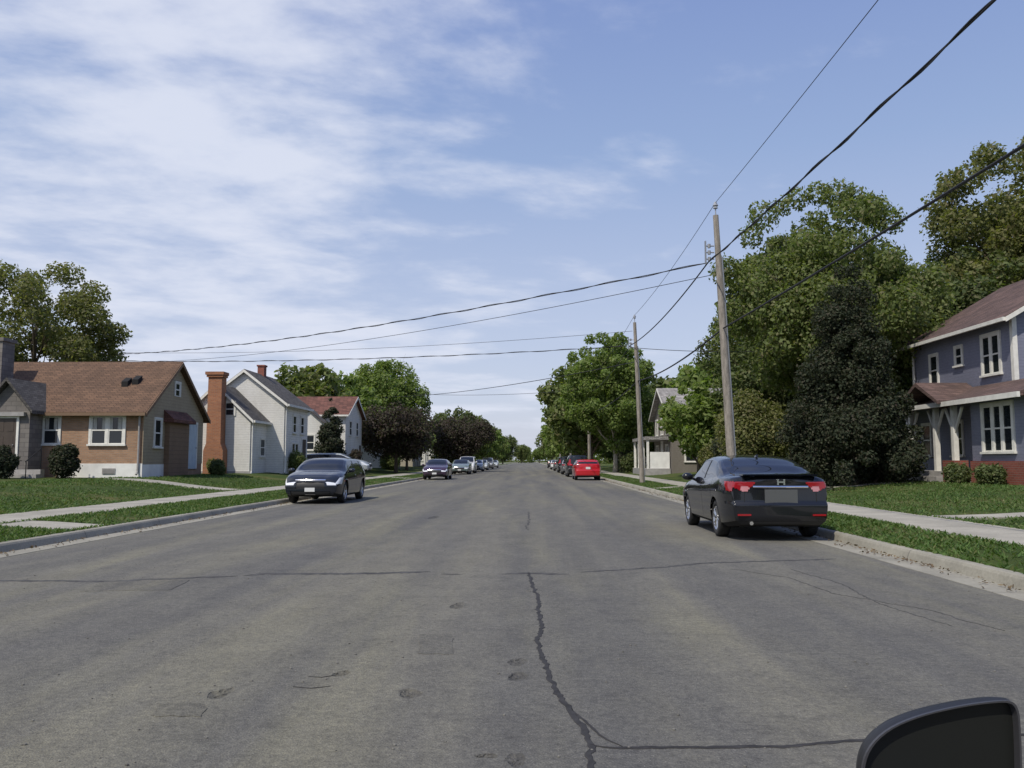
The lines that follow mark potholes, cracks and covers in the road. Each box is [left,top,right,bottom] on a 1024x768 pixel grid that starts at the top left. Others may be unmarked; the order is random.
crack [585,559,1005,631]
pothole [507,672,529,681]
pothole [507,658,528,666]
pothole [207,687,235,700]
pothole [398,688,423,699]
